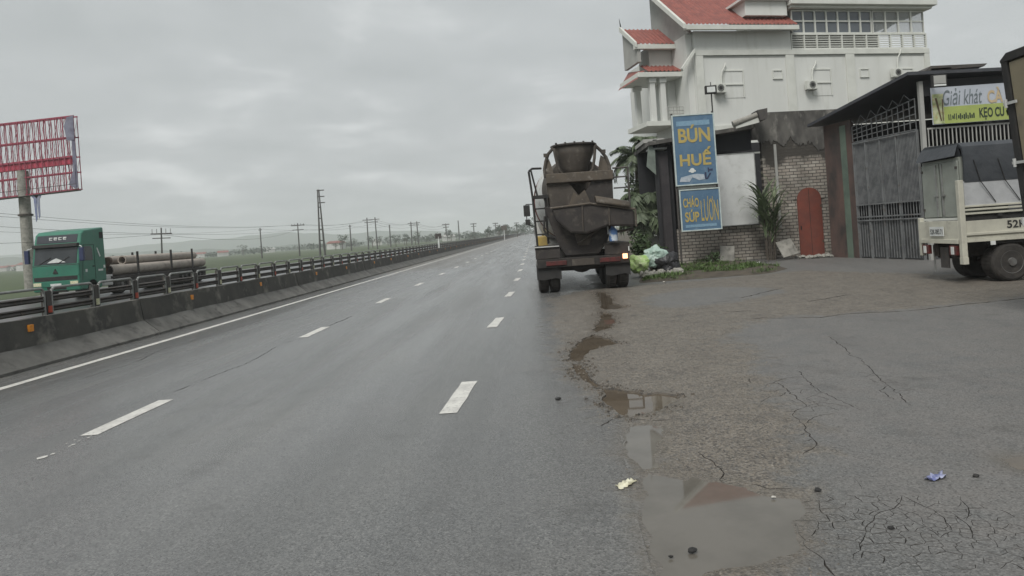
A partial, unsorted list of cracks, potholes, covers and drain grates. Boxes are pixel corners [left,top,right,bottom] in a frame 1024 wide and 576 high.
crack [828,336,913,403]
crack [698,452,799,489]
crack [795,495,1024,576]
pothole [568,335,619,361]
pothole [571,363,601,387]
crack [746,371,861,454]
pothole [601,388,678,417]
pothole [592,312,616,333]
pothole [594,291,628,310]
